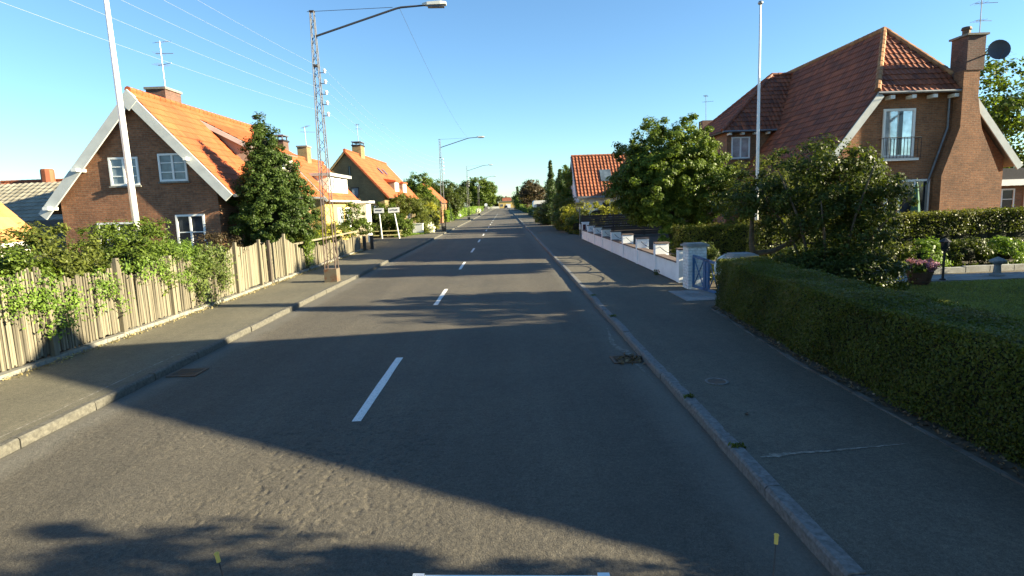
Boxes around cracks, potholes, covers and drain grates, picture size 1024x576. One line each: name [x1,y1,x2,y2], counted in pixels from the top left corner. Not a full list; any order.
drain grate [165,368,209,378]
crack [760,443,909,457]
